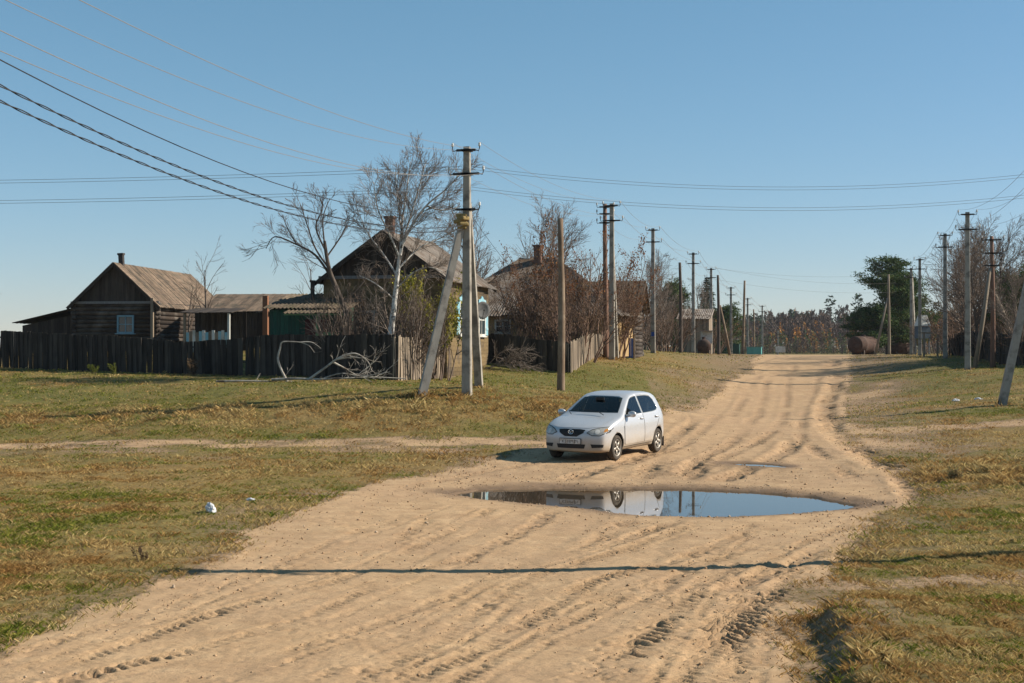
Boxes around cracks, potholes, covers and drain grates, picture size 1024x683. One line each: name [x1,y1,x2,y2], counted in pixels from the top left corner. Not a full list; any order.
pothole [449,486,871,517]
